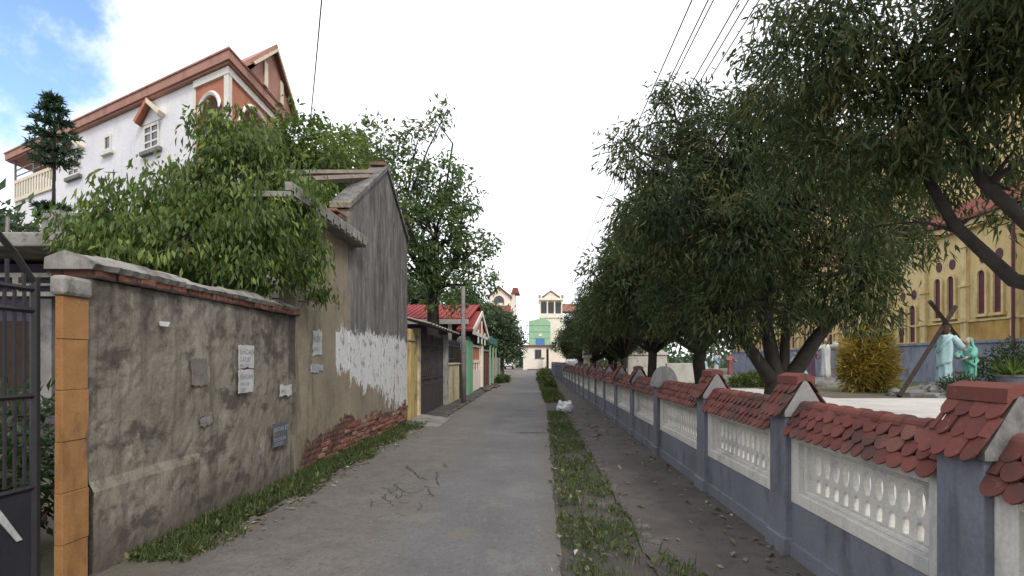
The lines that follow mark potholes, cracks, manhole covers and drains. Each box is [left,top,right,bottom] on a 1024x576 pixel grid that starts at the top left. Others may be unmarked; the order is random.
crack [369,464,449,516]
